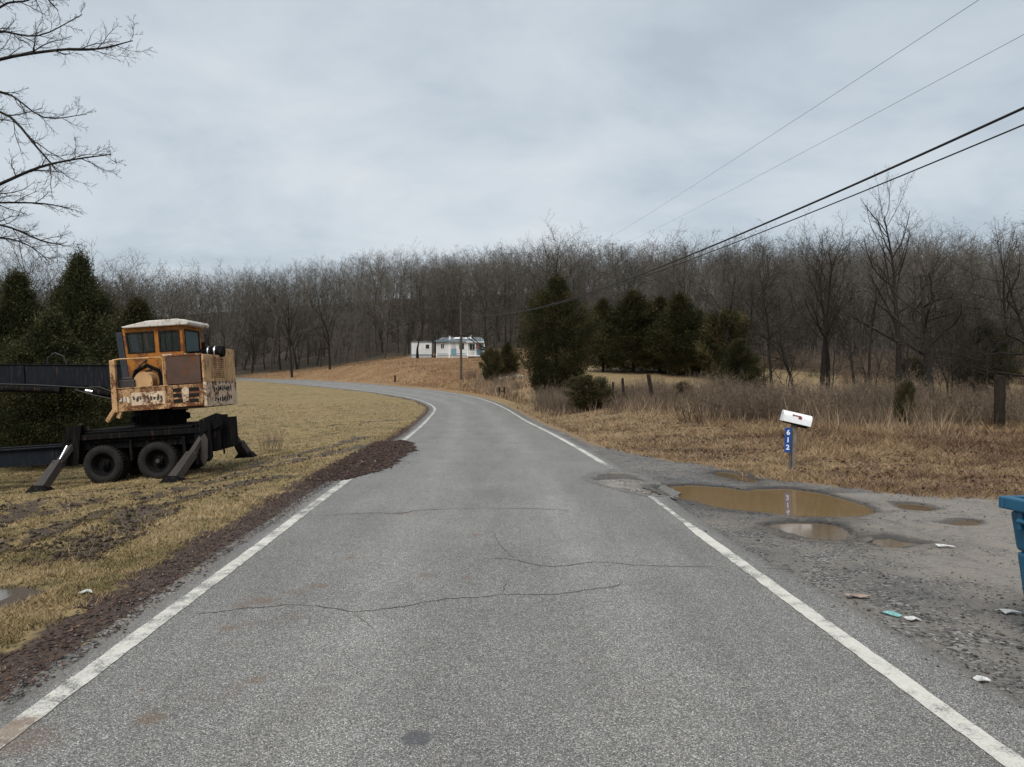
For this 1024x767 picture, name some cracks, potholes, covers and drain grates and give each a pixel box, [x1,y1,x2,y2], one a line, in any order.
crack [191,581,619,631]
pothole [581,470,681,498]
pothole [877,499,959,514]
pothole [746,518,873,543]
crack [489,530,804,571]
pothole [917,516,1006,529]
pothole [643,482,893,520]
pothole [700,470,775,484]
pothole [844,531,954,552]
